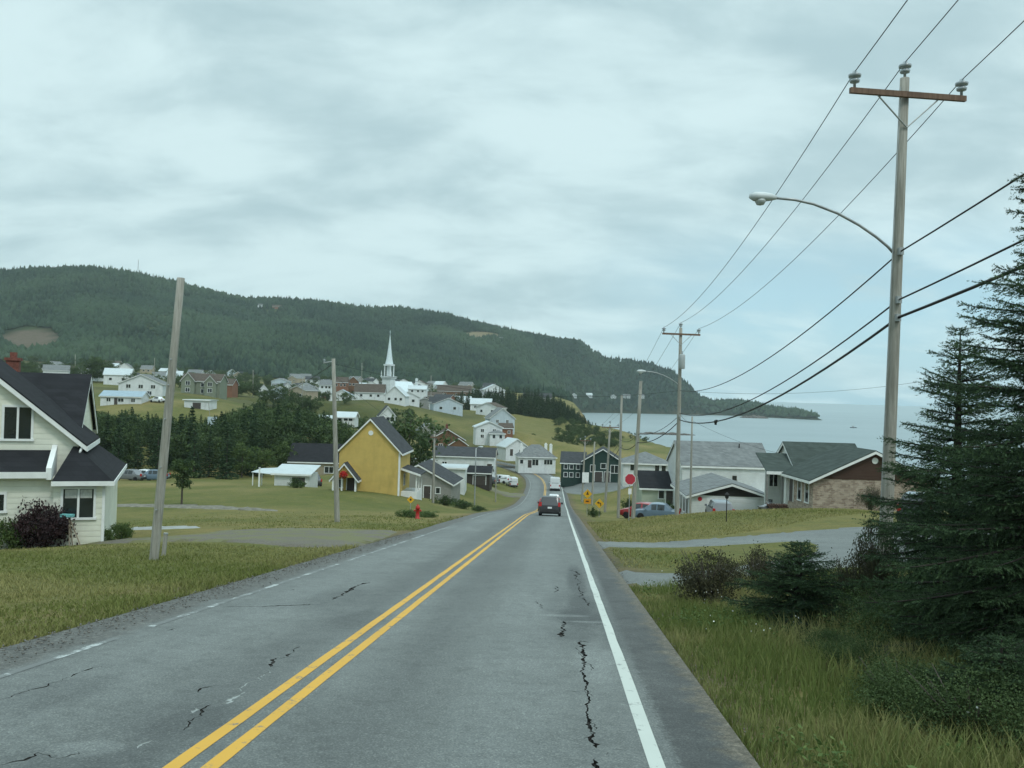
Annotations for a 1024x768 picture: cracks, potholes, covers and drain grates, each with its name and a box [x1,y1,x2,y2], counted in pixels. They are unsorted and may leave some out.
crack [184,647,298,730]
crack [6,752,80,764]
crack [536,570,619,768]
